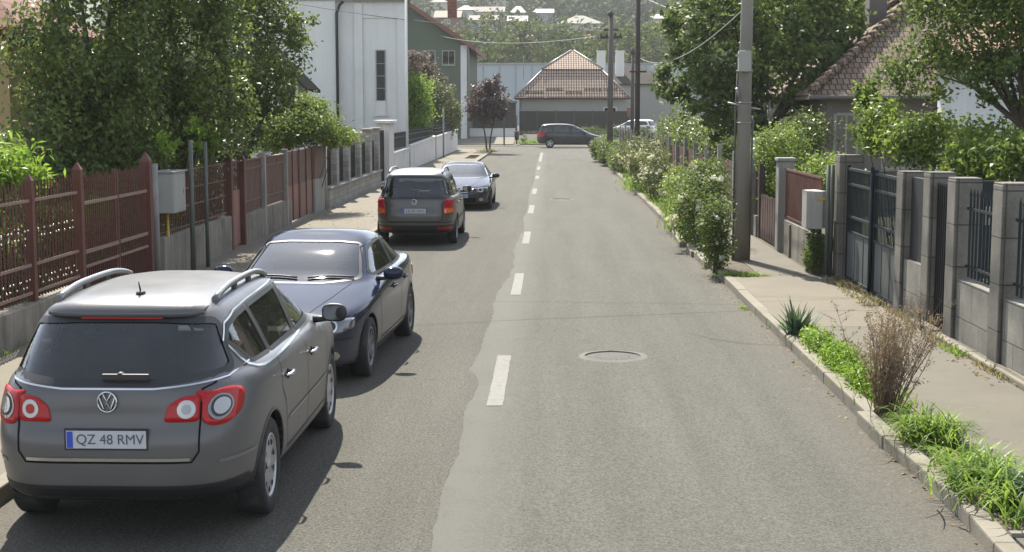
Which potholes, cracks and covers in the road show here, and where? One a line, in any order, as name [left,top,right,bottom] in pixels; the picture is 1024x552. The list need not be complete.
manhole cover [579,350,647,362]
